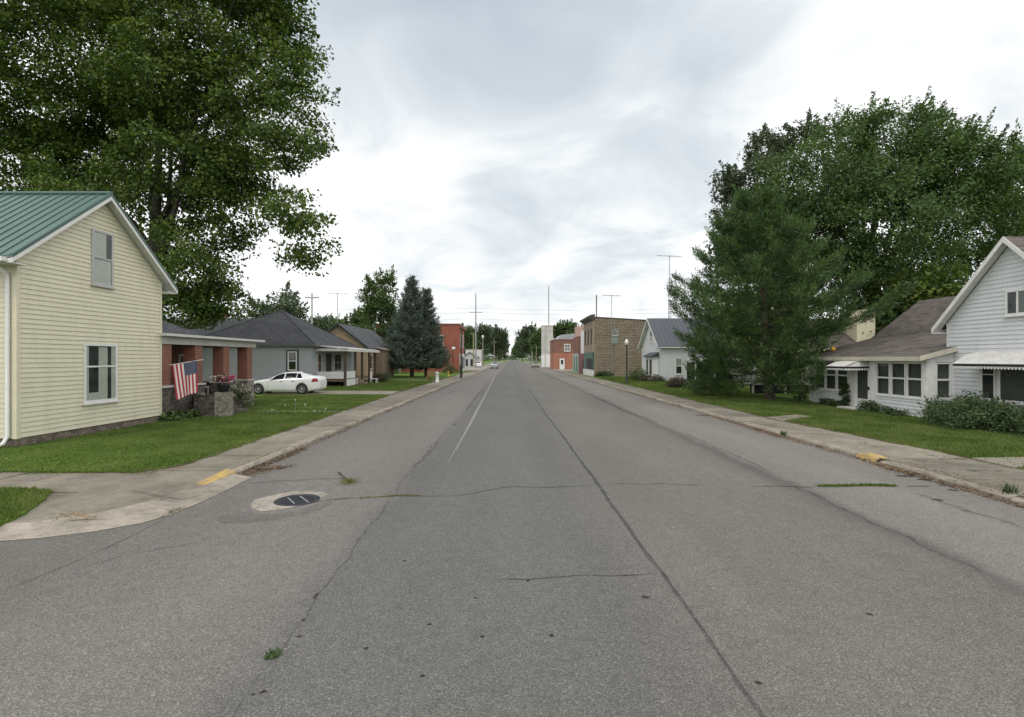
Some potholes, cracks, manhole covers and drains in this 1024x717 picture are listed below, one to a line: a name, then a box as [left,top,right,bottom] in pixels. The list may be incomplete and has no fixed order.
manhole cover [251,491,328,511]
crack [339,443,754,700]
